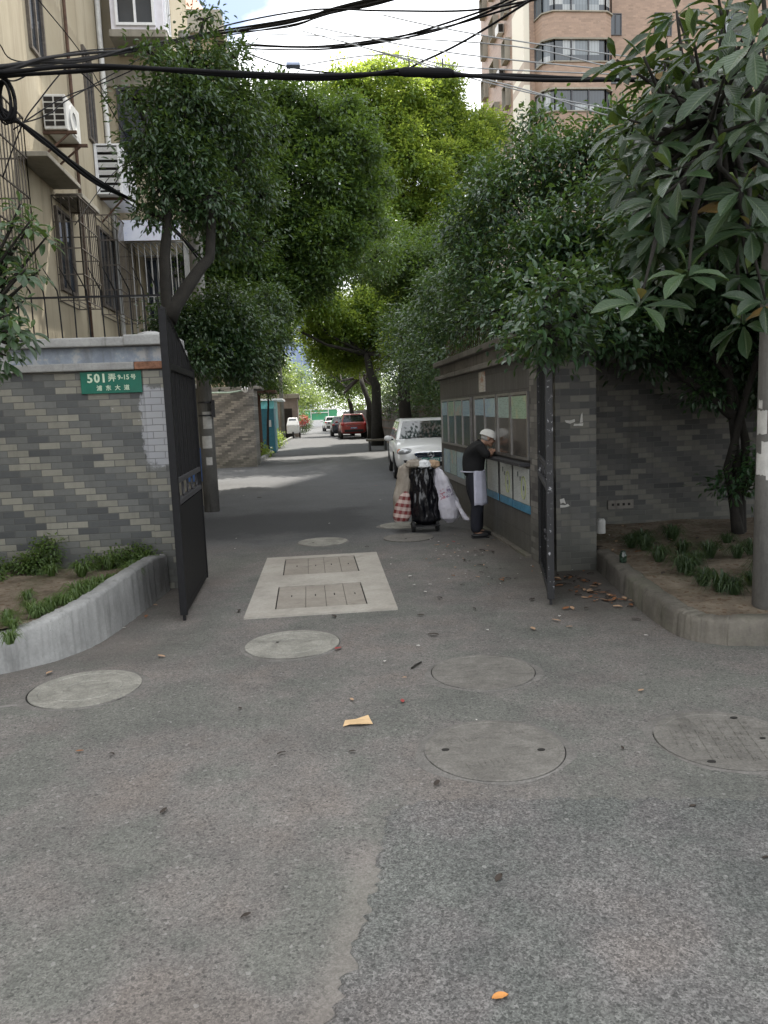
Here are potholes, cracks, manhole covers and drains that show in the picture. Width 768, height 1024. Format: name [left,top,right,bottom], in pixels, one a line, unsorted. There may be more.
manhole cover [425,655,545,692]
manhole cover [16,669,151,711]
utility cover [283,556,359,575]
manhole cover [642,710,768,775]
manhole cover [297,537,349,547]
utility cover [275,583,367,609]
manhole cover [240,630,342,663]
manhole cover [416,720,578,786]
